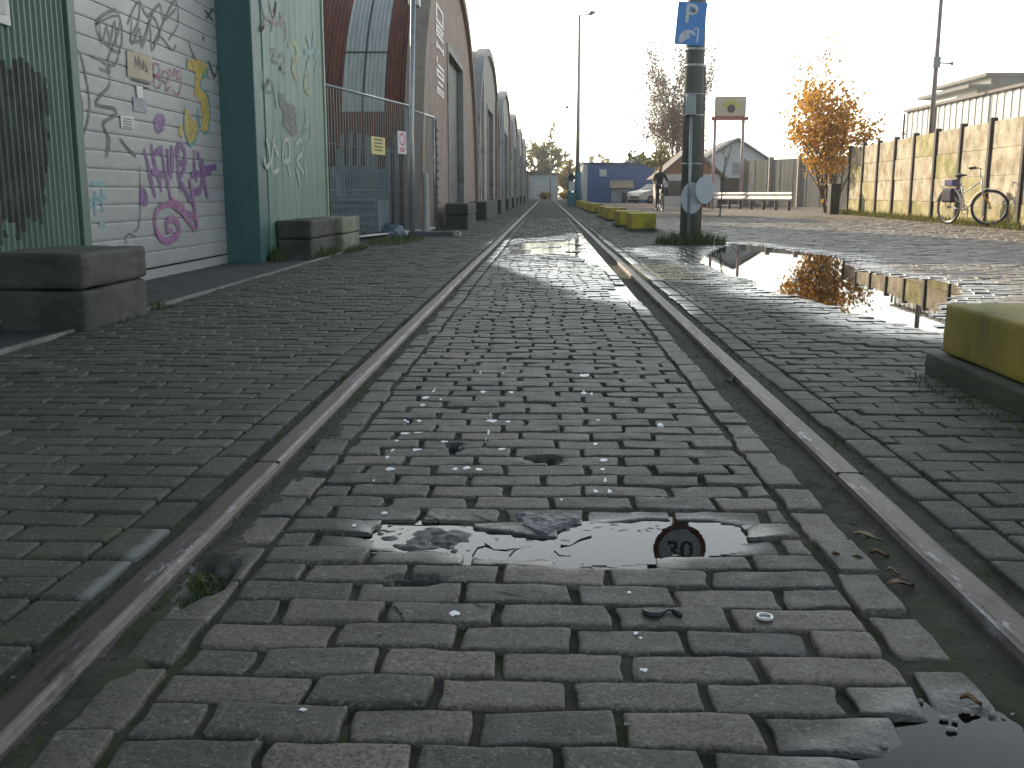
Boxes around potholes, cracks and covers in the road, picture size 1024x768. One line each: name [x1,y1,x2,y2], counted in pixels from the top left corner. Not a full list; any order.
pothole [170,564,239,611]
pothole [372,525,746,566]
